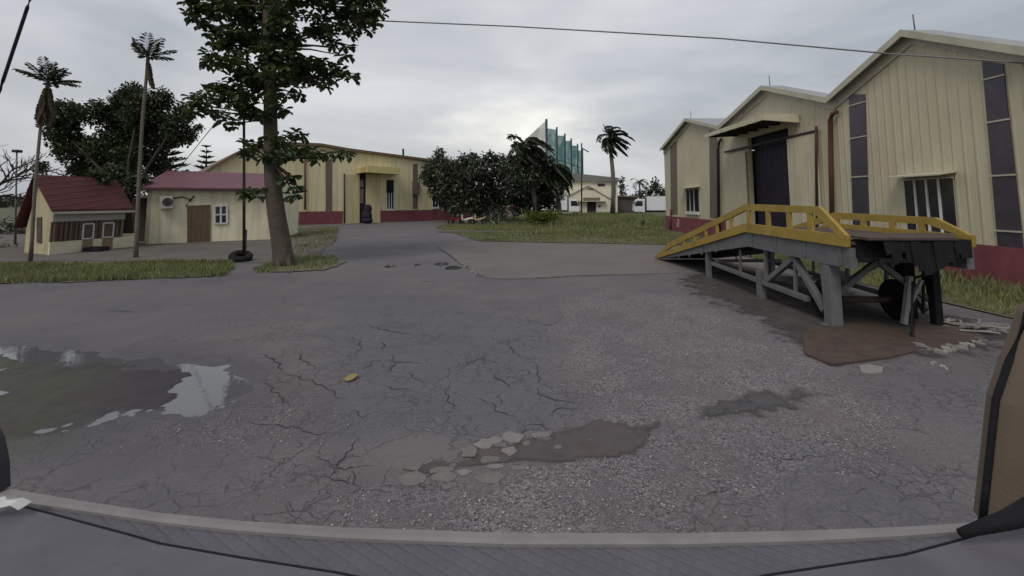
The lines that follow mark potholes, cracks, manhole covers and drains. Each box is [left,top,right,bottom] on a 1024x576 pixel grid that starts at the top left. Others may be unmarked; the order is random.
crack [264,352,339,406]
crack [466,342,575,434]
pothole [418,420,658,474]
crack [243,410,386,492]
crack [353,325,424,389]
